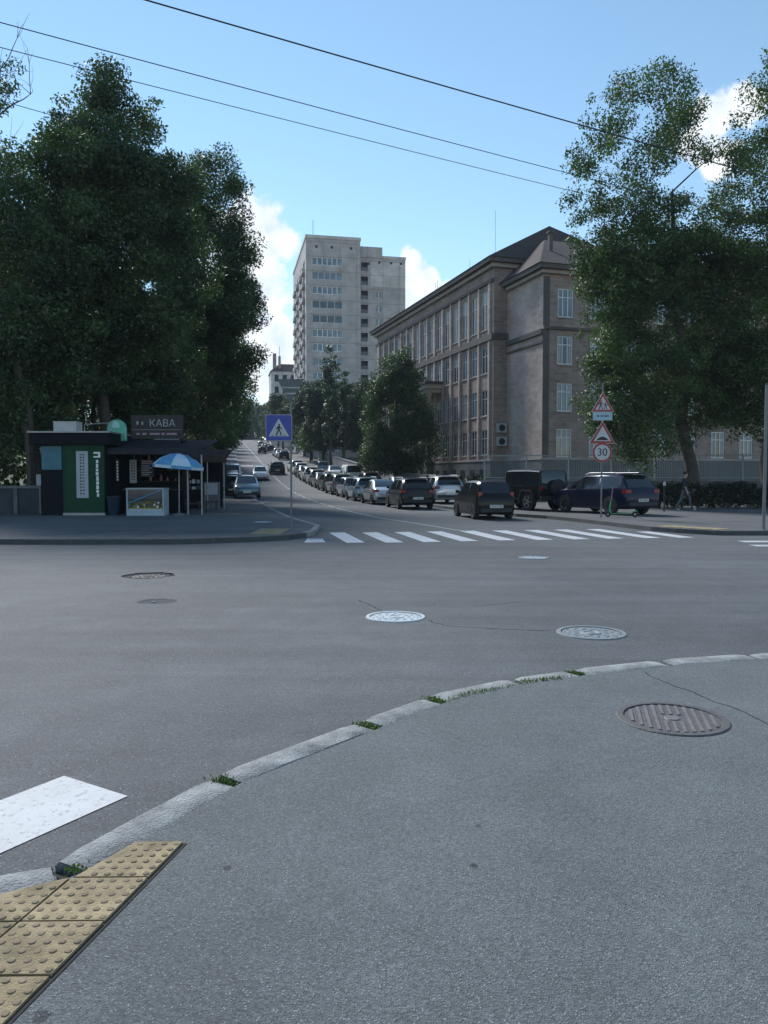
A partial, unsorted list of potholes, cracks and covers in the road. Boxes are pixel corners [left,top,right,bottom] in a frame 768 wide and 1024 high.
manhole cover [556,625,627,640]
manhole cover [616,702,731,737]
manhole cover [366,611,425,623]
crack [642,670,768,725]
crack [429,620,547,631]
